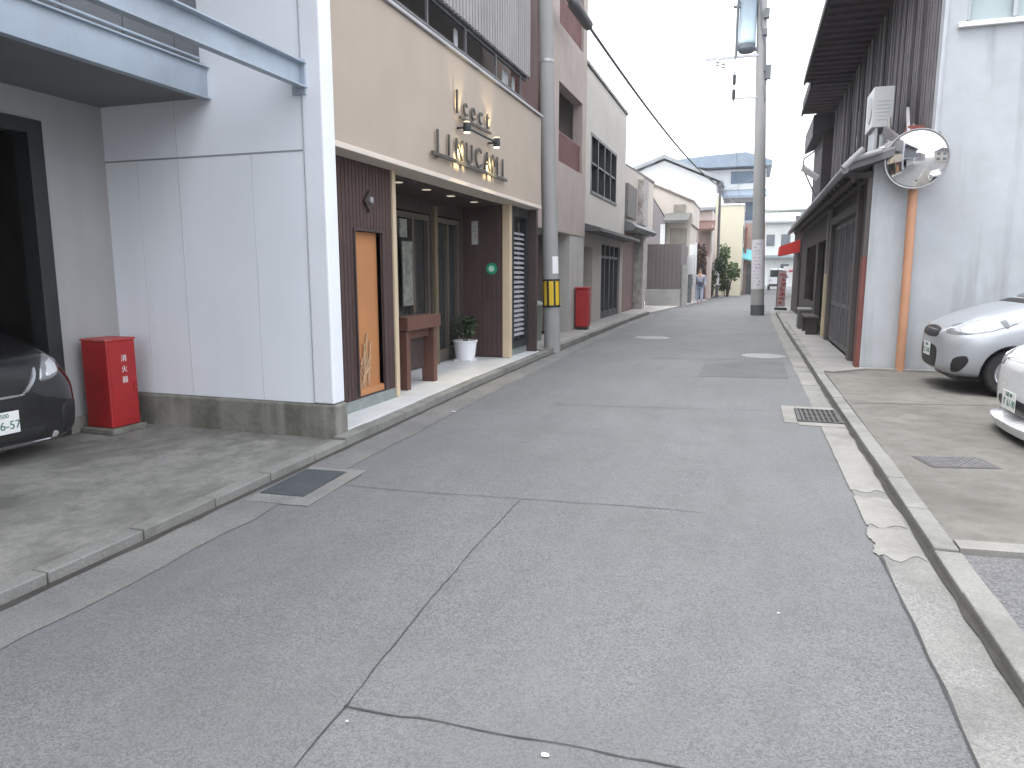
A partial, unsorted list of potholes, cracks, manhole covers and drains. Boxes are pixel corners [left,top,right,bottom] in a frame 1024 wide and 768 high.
drain grate [781,405,847,428]
drain grate [244,466,366,507]
